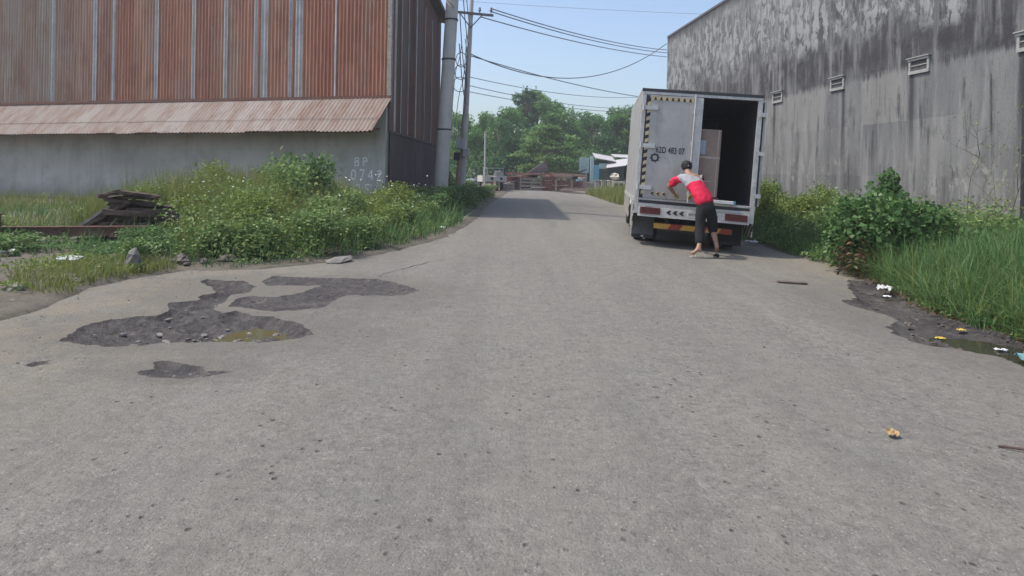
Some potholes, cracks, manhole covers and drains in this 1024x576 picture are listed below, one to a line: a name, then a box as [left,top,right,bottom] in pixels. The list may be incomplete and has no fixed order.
pothole [228,276,420,312]
pothole [842,280,1024,367]
pothole [137,360,235,379]
pothole [59,279,314,347]
